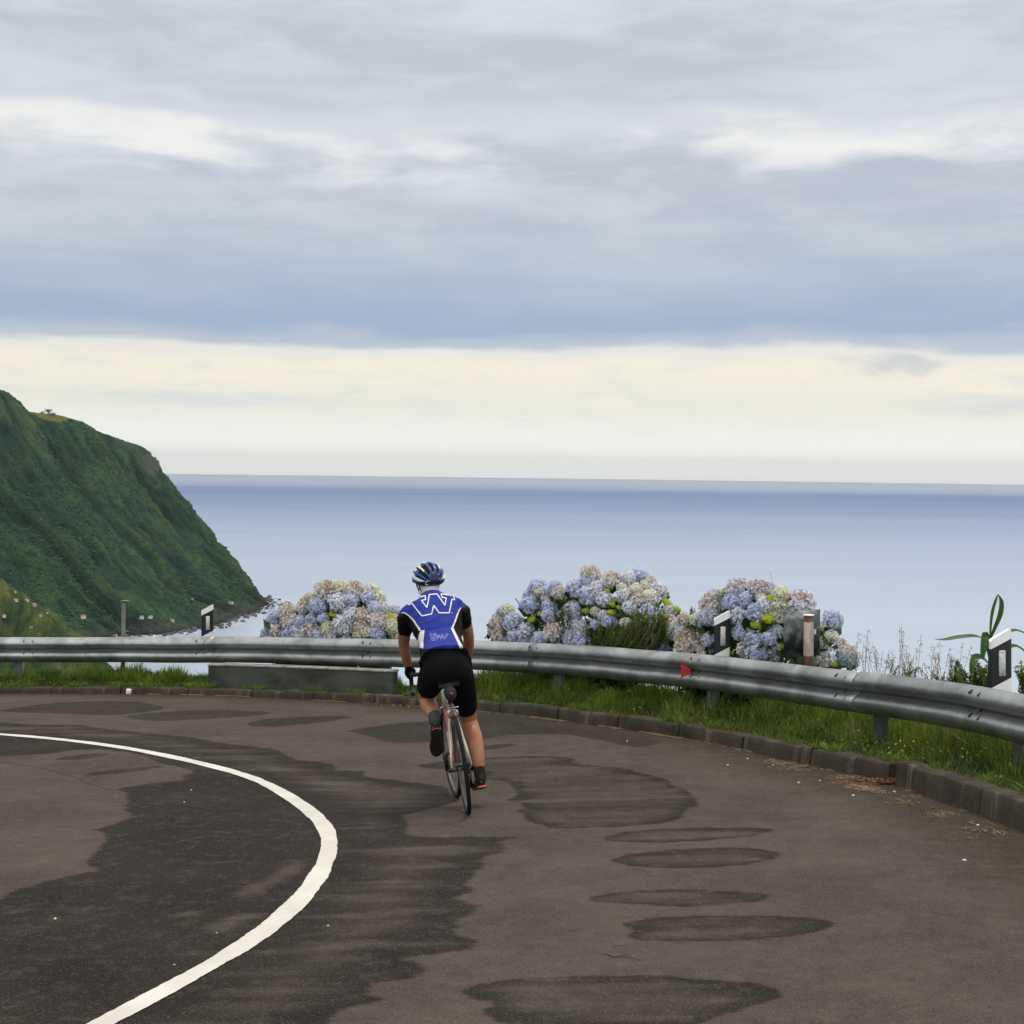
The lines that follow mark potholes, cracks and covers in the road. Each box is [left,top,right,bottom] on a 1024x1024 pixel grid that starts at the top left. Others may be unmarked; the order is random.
crack [596,944,698,980]
